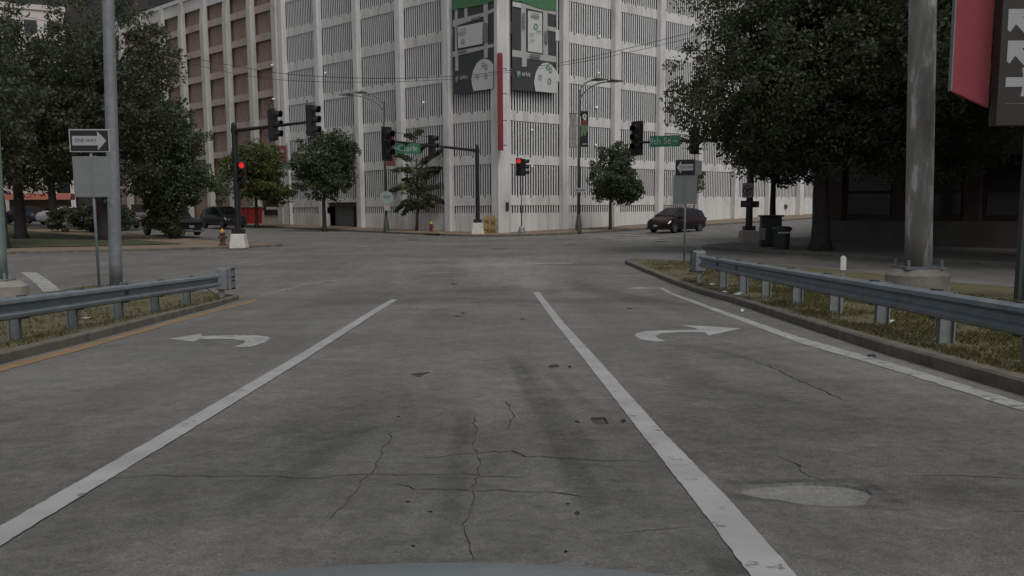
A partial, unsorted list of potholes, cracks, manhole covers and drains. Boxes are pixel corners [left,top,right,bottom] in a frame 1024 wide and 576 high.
crack [114,400,650,561]
crack [756,362,842,400]
